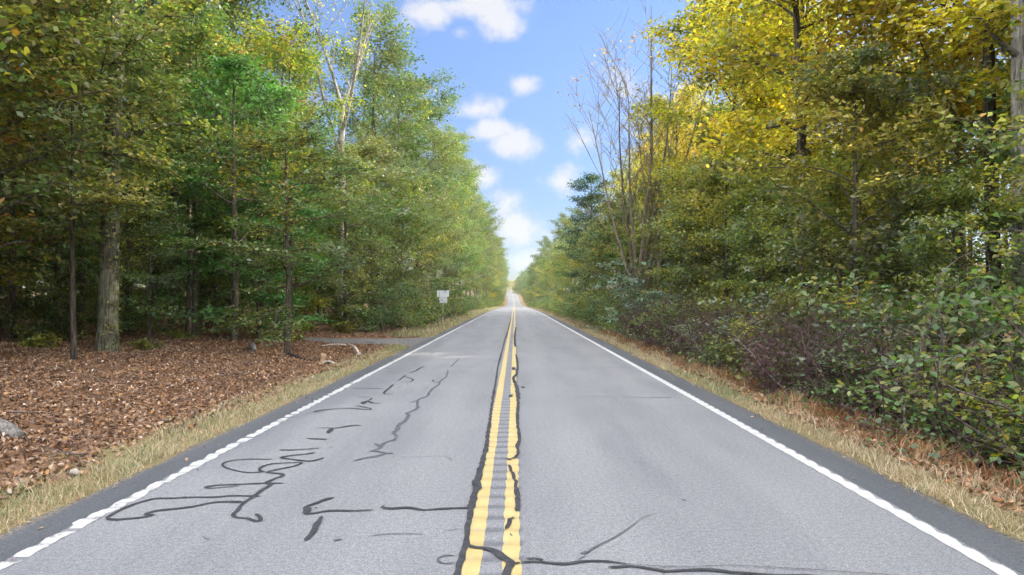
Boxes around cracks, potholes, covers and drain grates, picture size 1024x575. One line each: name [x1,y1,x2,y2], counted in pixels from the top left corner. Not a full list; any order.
crack [578,513,656,559]
crack [334,528,460,541]
